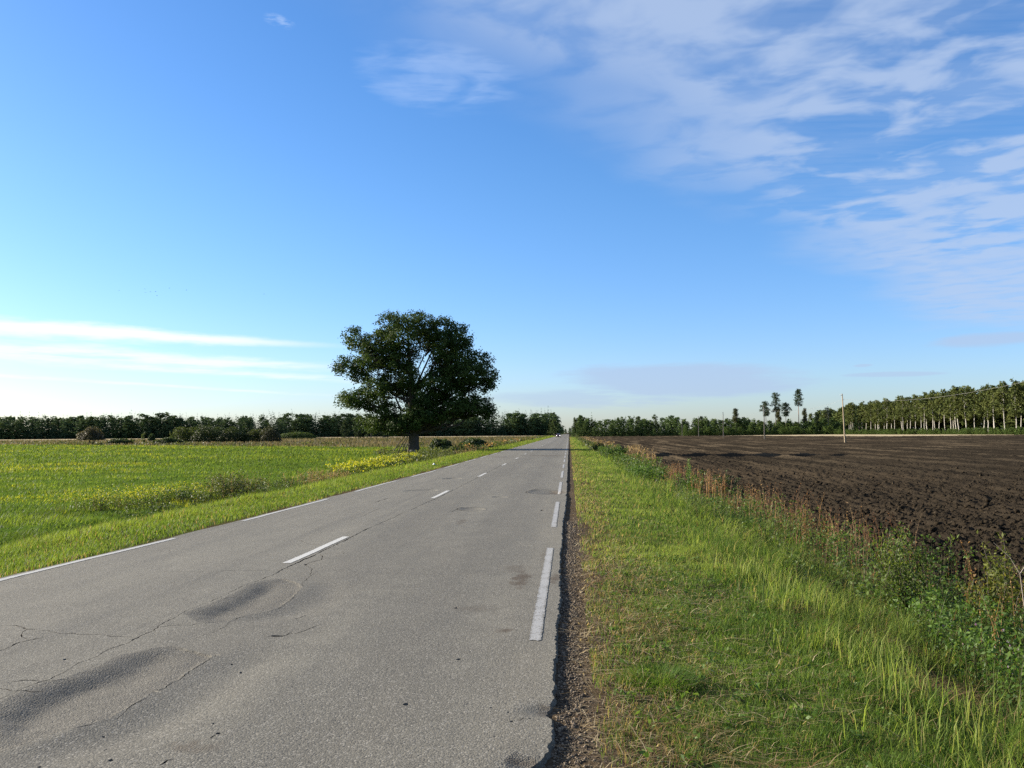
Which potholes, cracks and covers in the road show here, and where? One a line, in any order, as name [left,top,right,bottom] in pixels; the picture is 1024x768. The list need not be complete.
crack [0,653,216,753]
crack [0,465,501,699]
